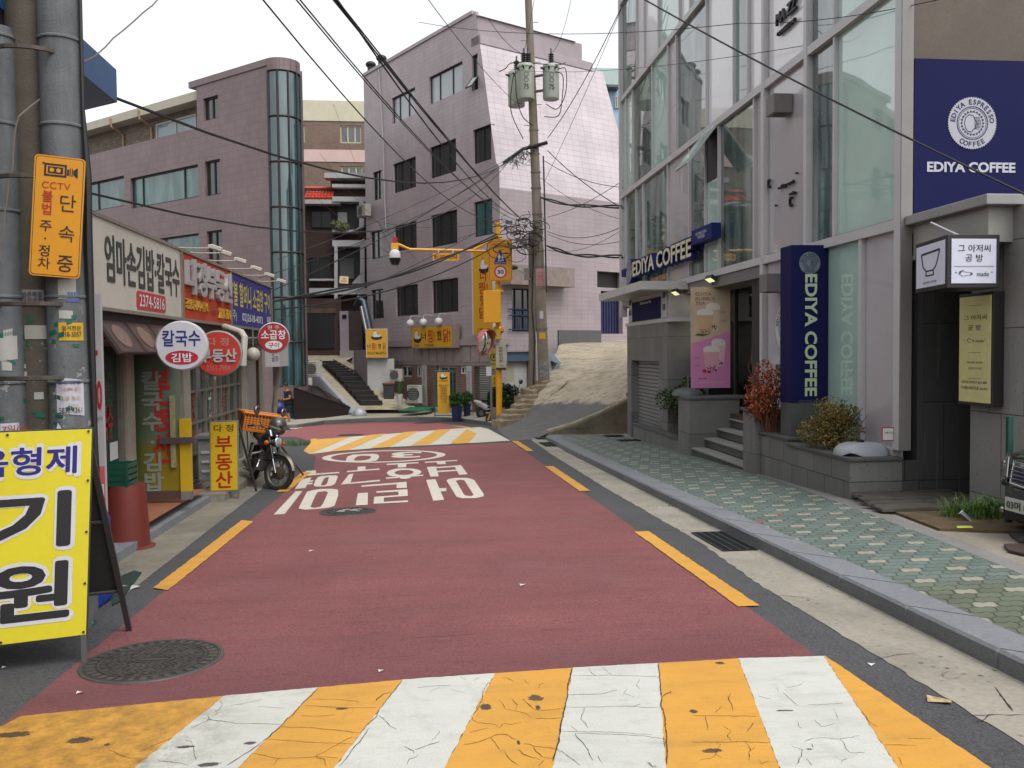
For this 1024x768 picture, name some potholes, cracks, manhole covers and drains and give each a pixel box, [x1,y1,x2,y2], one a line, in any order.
crack [255,699,366,765]
manhole cover [77,639,225,684]
crack [965,687,1023,723]
crack [760,684,932,764]
crack [425,667,663,766]
manhole cover [319,507,376,516]
crack [693,693,770,762]
crack [63,699,276,764]
drain grate [691,531,758,551]
